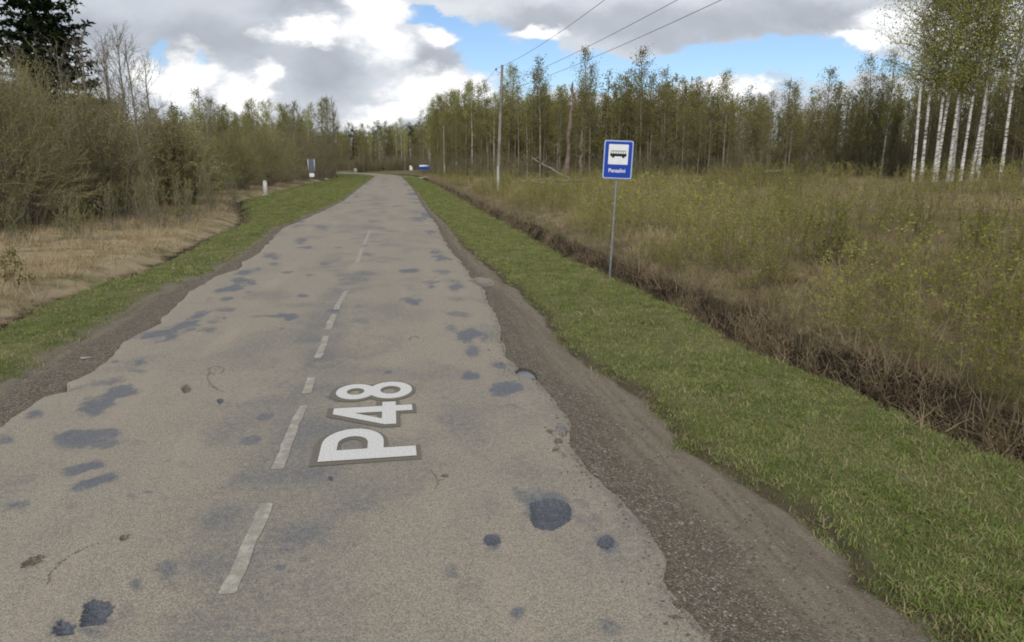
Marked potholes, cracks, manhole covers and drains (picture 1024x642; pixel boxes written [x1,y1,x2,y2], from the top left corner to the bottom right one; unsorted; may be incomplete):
crack [46,543,99,584]
pothole [515,368,538,380]
crack [206,366,226,392]
